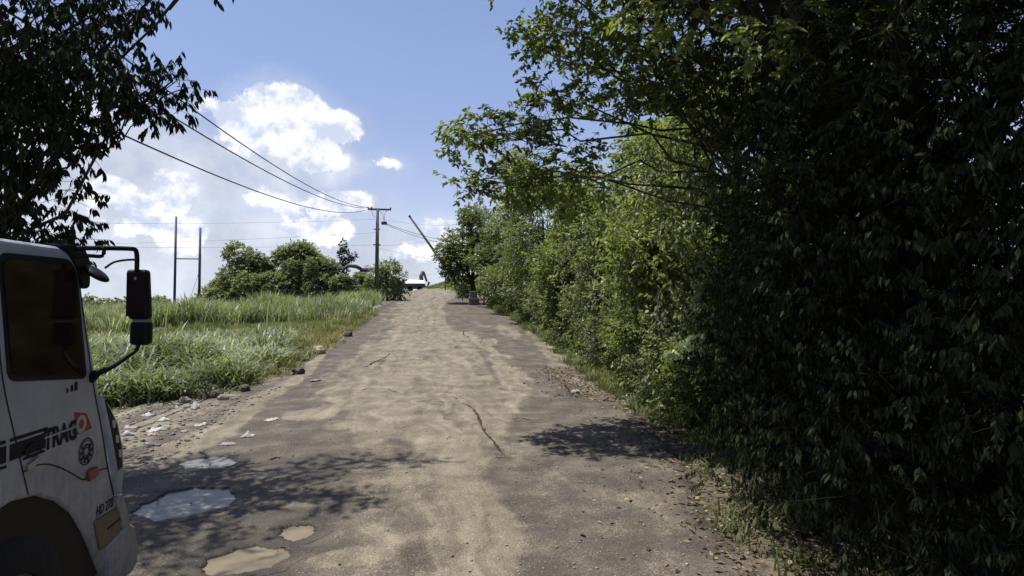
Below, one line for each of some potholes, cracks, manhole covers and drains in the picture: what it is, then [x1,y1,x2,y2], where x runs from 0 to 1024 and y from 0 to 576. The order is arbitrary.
crack [347,371,598,457]
crack [459,330,473,339]
pothole [260,517,334,546]
pothole [126,482,251,526]
pothole [176,538,313,576]
pothole [165,453,251,471]
